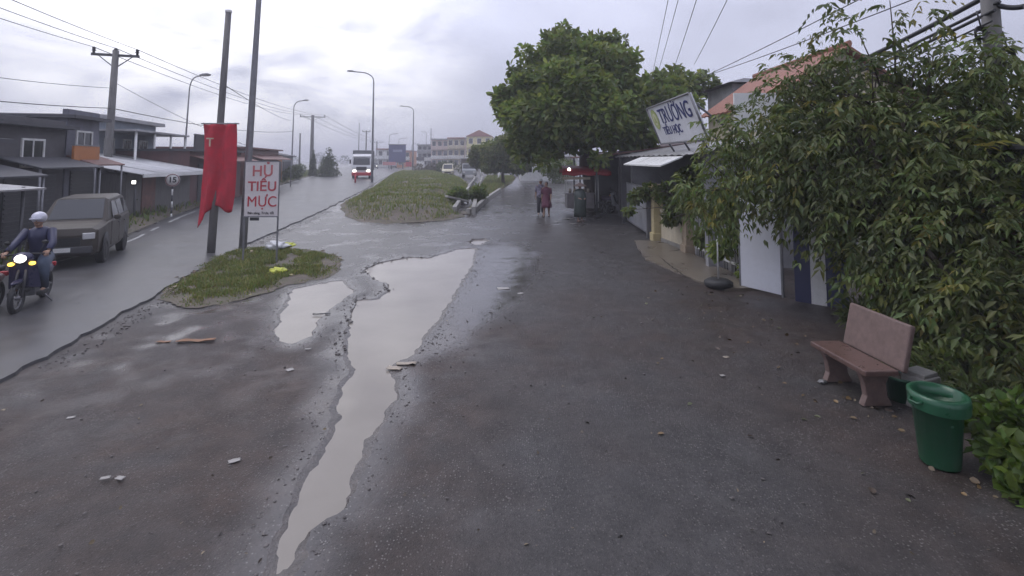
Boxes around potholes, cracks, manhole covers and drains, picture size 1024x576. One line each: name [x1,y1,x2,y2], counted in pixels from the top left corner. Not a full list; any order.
pothole [262,247,479,576]
